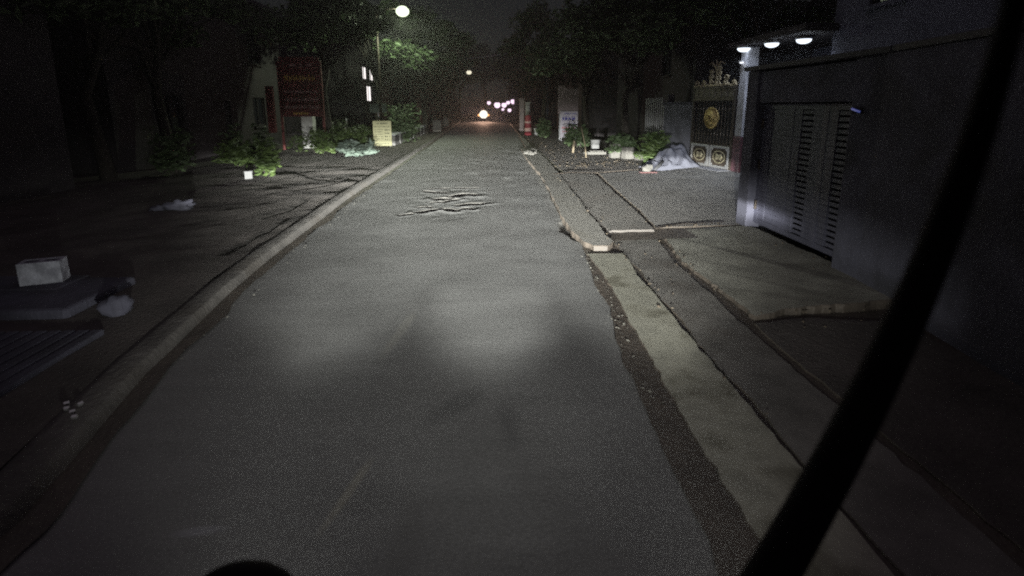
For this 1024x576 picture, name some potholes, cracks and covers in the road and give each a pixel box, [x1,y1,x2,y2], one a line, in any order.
crack [258,168,357,219]
